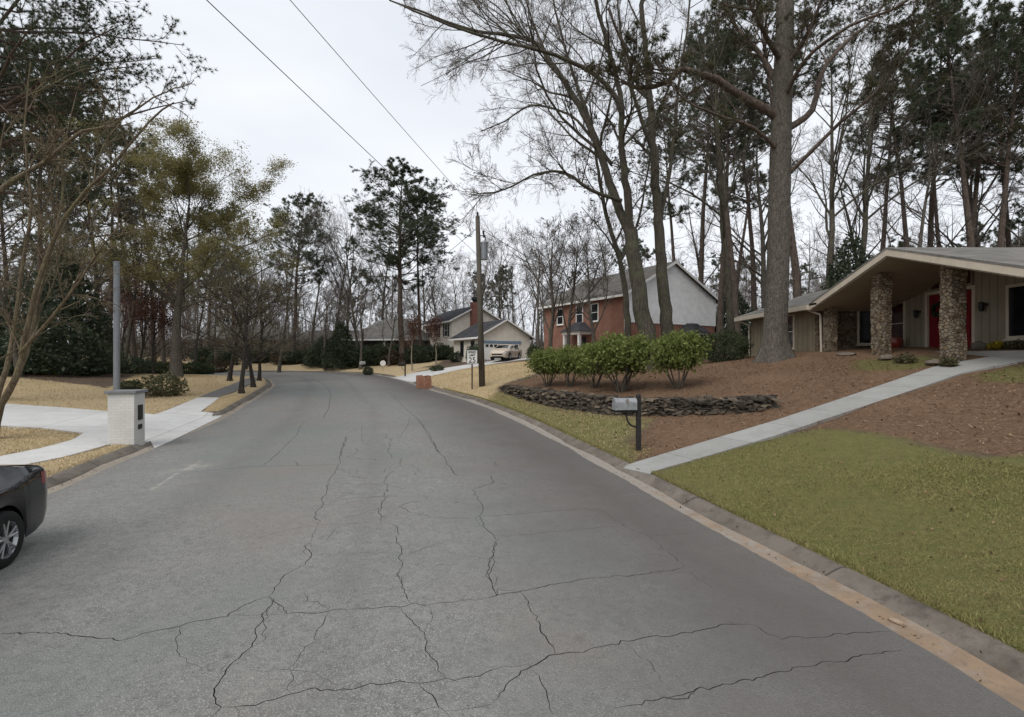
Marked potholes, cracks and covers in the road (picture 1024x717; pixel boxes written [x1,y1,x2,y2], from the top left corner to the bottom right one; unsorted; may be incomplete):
crack [4,419,889,717]
